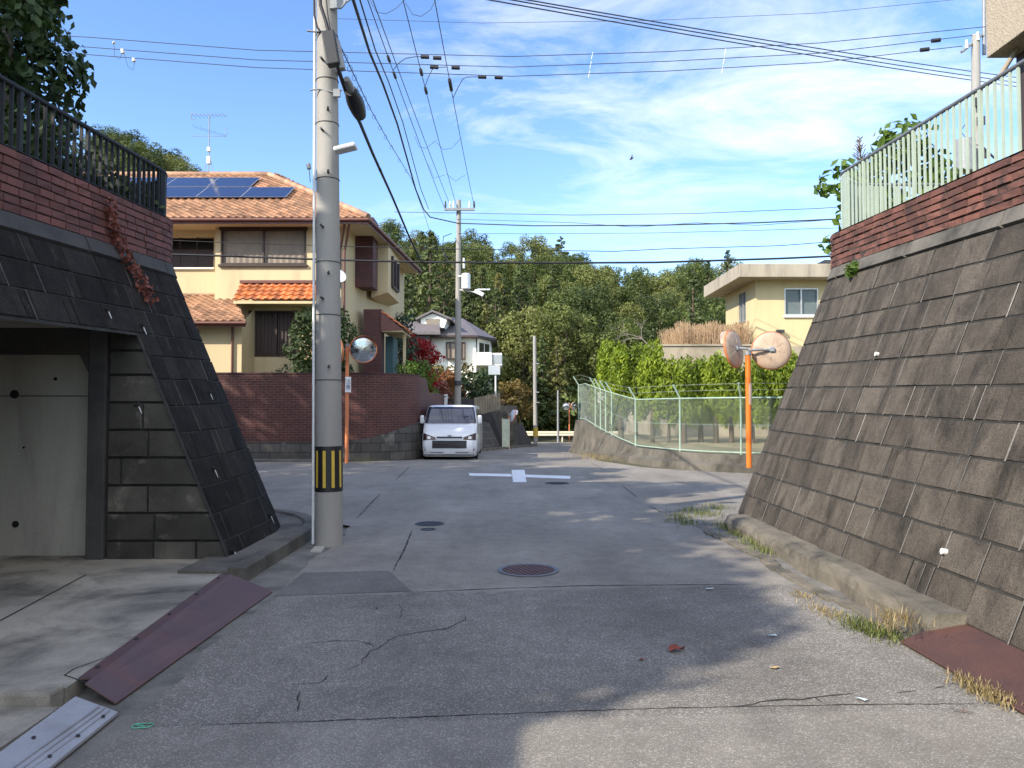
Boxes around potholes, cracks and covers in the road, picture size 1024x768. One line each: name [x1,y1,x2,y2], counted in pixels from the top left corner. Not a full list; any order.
crack [738,693,851,706]
crack [297,604,466,712]
manhole cover [498,563,559,577]
